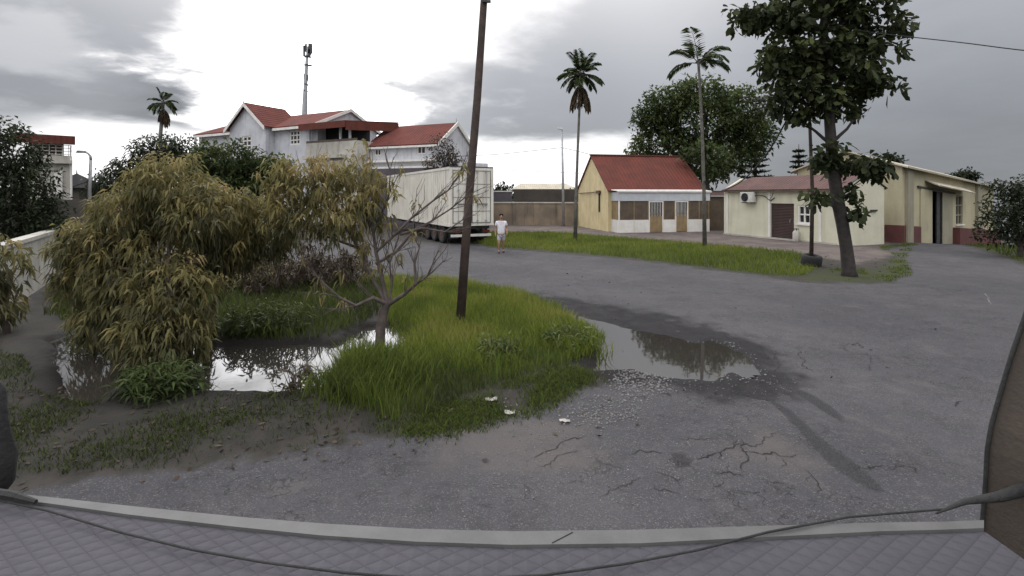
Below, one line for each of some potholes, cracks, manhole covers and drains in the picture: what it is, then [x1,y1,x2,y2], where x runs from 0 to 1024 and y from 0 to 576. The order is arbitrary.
crack [534,433,828,503]
